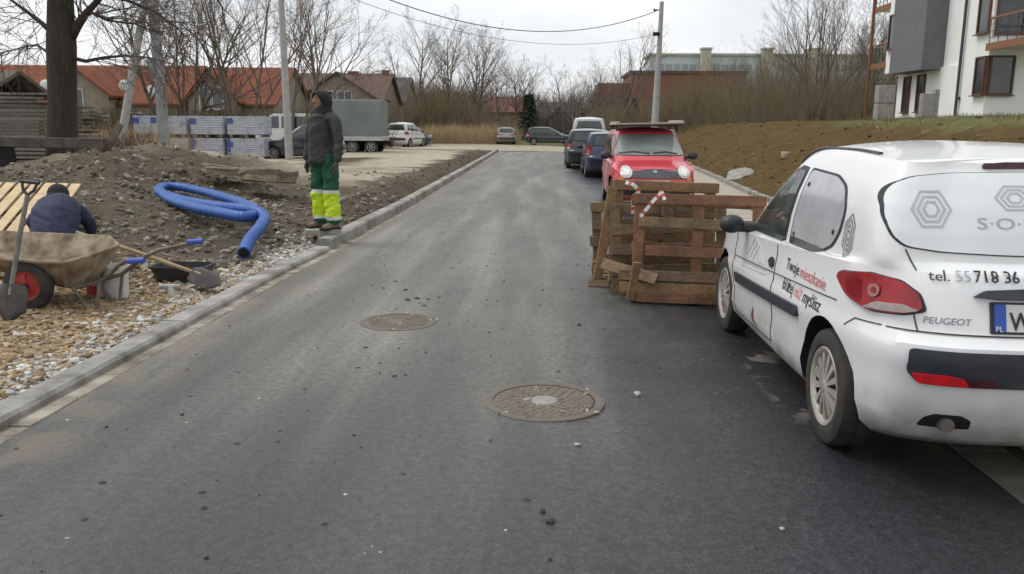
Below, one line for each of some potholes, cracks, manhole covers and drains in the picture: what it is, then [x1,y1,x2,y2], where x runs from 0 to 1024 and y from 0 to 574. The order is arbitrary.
manhole cover [484,382,605,422]
manhole cover [359,312,439,331]
